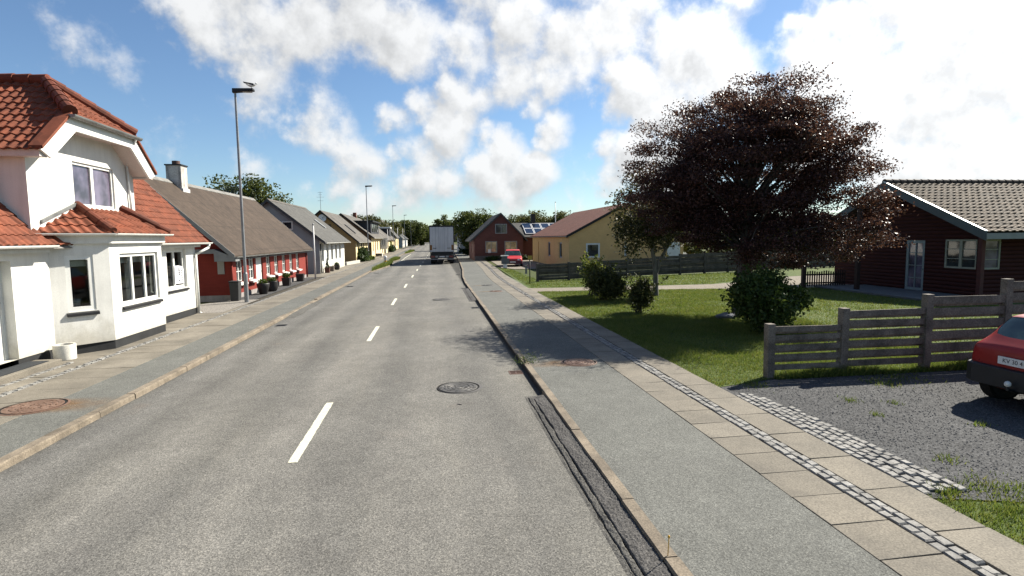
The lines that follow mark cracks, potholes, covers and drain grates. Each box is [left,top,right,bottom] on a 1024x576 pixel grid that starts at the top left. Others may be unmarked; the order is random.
manhole cover [0,398,71,416]
manhole cover [437,381,483,394]
manhole cover [561,358,597,366]
